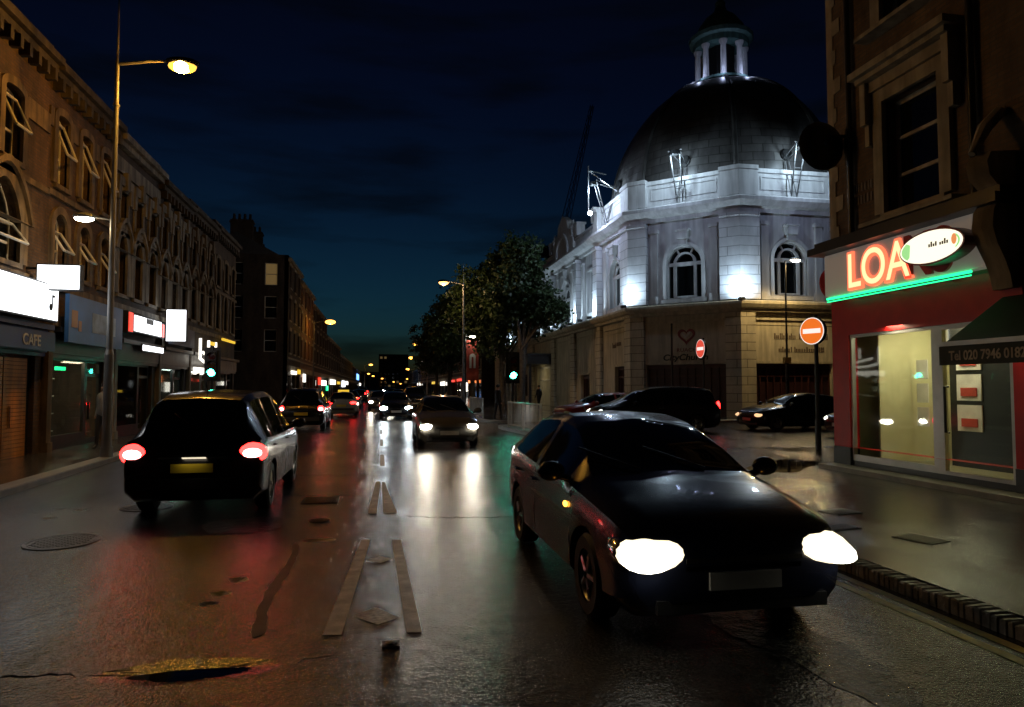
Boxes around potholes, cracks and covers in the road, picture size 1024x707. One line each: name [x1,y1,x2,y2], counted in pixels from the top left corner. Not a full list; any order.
manhole cover [891,533,951,545]
manhole cover [21,533,102,551]
pothole [82,657,282,686]
